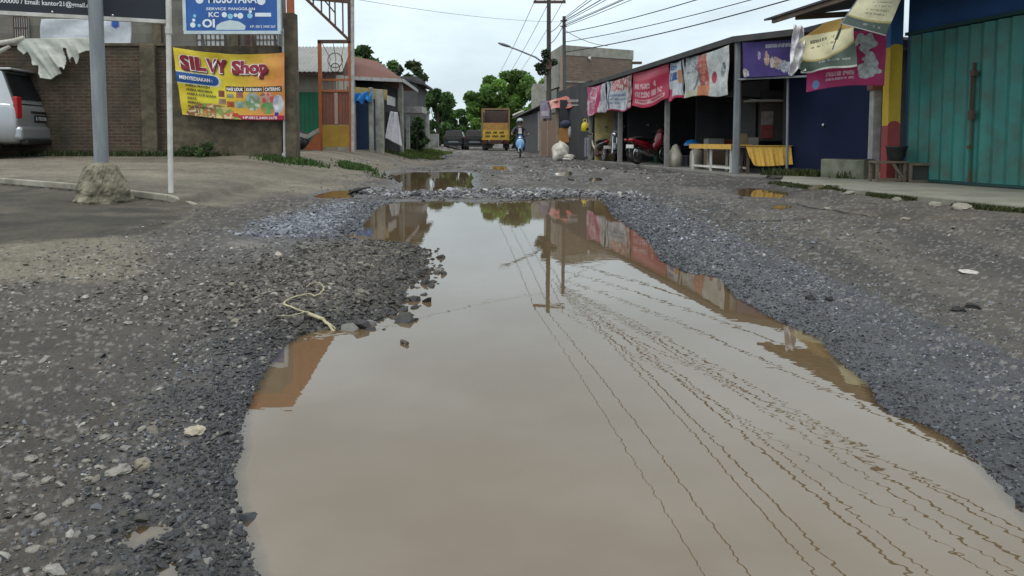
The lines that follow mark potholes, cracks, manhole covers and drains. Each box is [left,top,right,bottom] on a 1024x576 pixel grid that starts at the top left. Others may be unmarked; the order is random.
pothole [309,190,362,199]
pothole [185,197,1024,576]
pothole [386,171,478,192]
pothole [727,187,792,198]
